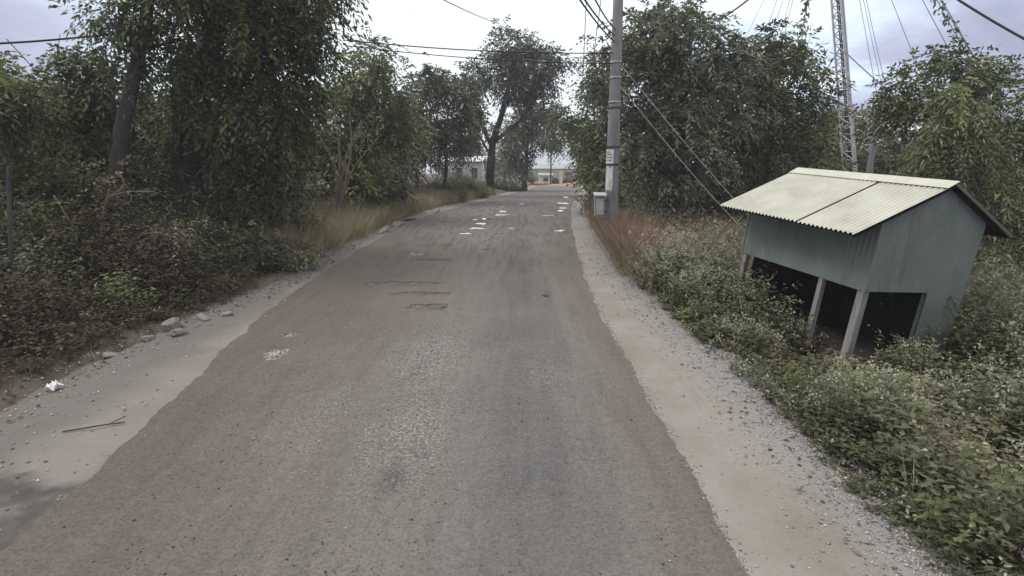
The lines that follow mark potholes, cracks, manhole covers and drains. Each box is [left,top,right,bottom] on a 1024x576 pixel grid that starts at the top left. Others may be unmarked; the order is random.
pothole [263,348,290,360]
pothole [405,303,449,311]
